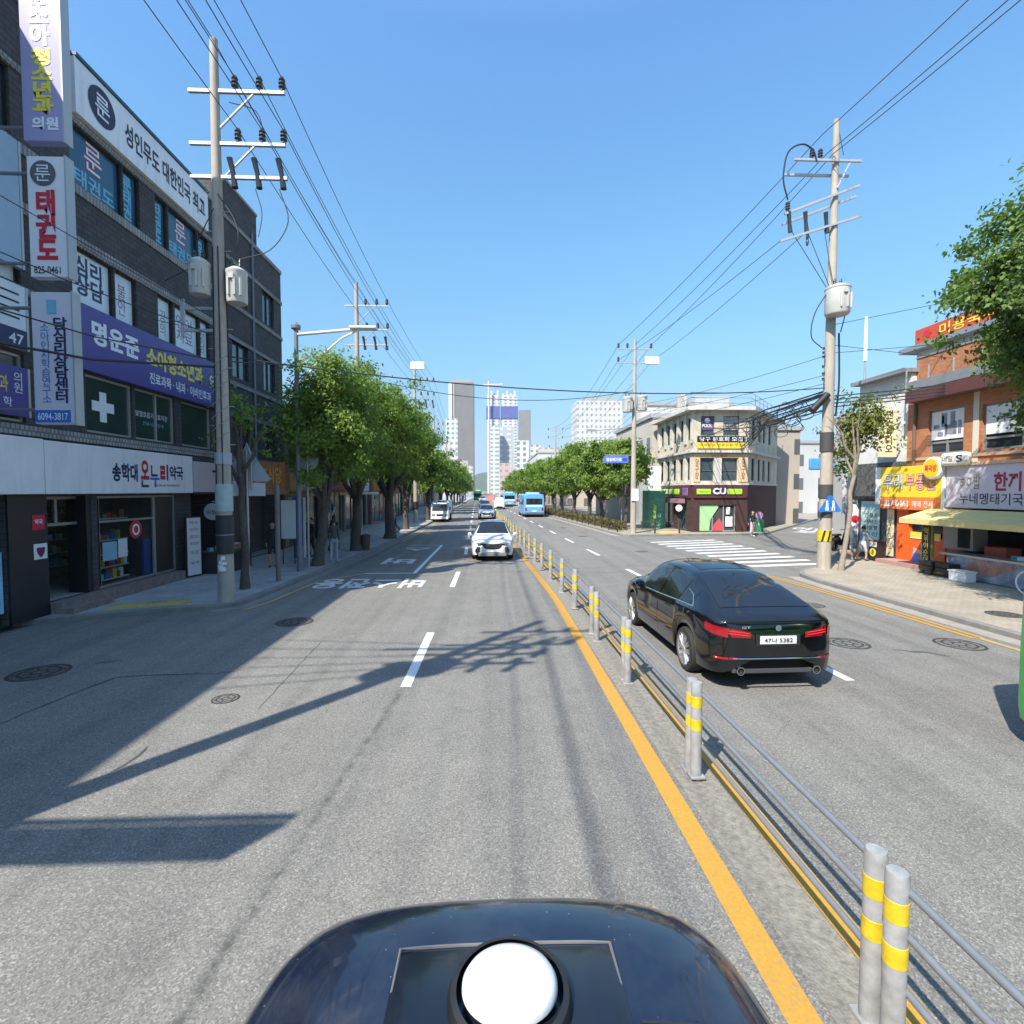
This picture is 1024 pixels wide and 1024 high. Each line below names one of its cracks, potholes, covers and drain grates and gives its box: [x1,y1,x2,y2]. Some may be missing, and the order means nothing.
manhole cover [4,664,73,682]
manhole cover [830,638,872,649]
manhole cover [275,617,314,627]
manhole cover [932,638,989,651]
manhole cover [211,693,240,704]
